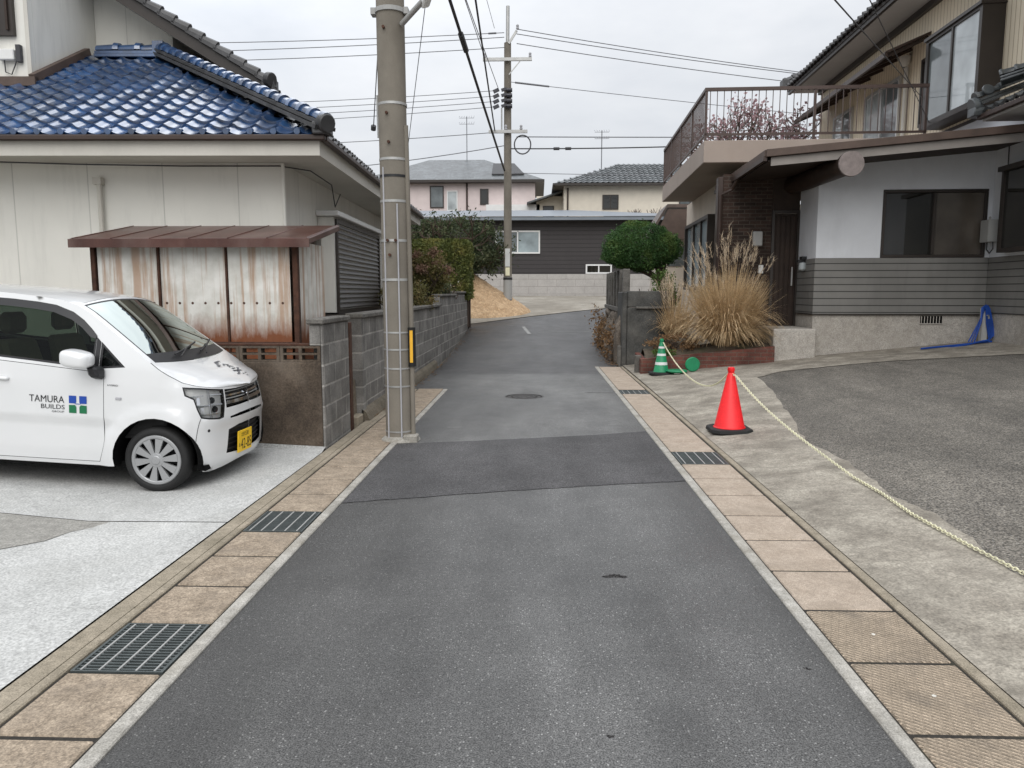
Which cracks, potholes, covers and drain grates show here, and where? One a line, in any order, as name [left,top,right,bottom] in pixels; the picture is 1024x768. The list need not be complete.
drain grate [70,623,210,675]
drain grate [243,511,322,533]
drain grate [671,452,729,465]
